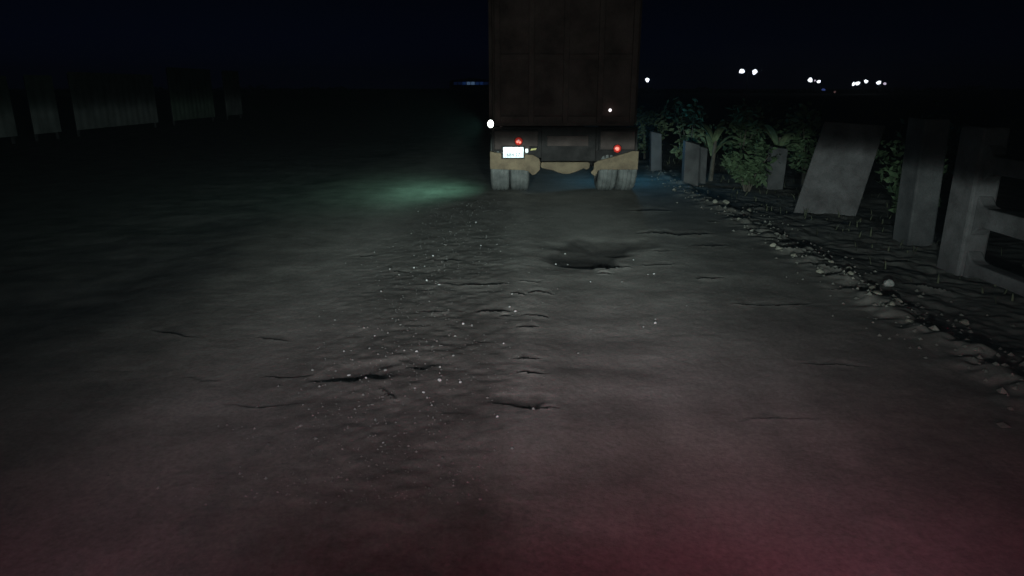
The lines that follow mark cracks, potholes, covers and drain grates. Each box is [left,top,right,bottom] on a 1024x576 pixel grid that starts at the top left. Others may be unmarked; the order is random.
crack [729,244,966,340]
crack [738,411,818,422]
crack [596,197,784,275]
crack [440,278,555,327]
crack [799,360,872,368]
crack [151,325,194,337]
pothole [537,236,665,270]
